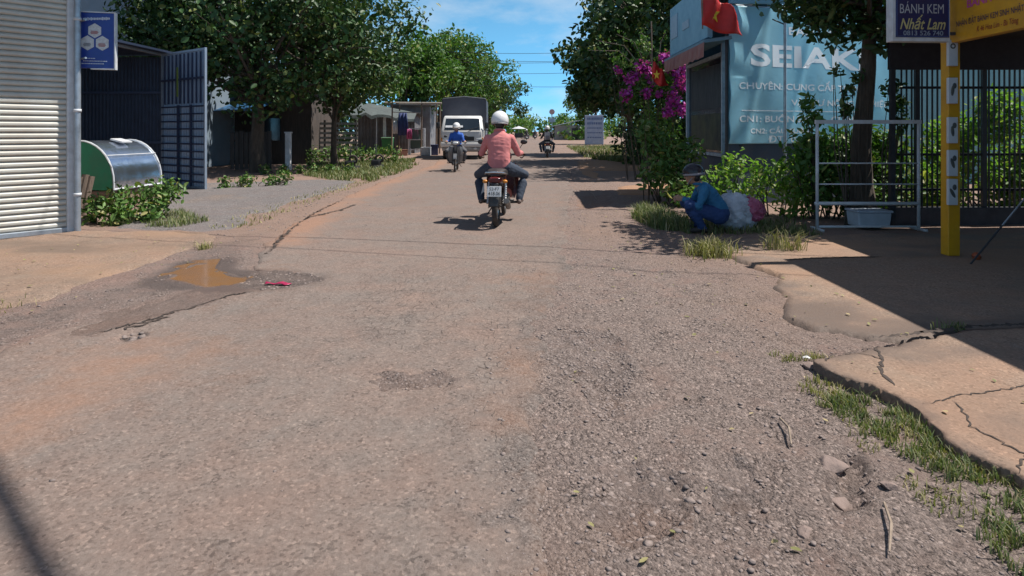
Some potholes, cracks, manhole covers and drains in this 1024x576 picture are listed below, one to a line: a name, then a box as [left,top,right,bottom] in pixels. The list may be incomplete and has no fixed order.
crack [99,291,253,332]
pothole [236,270,327,290]
pothole [369,370,462,392]
pothole [160,259,252,287]
crack [264,201,353,254]
crack [933,385,1024,471]
